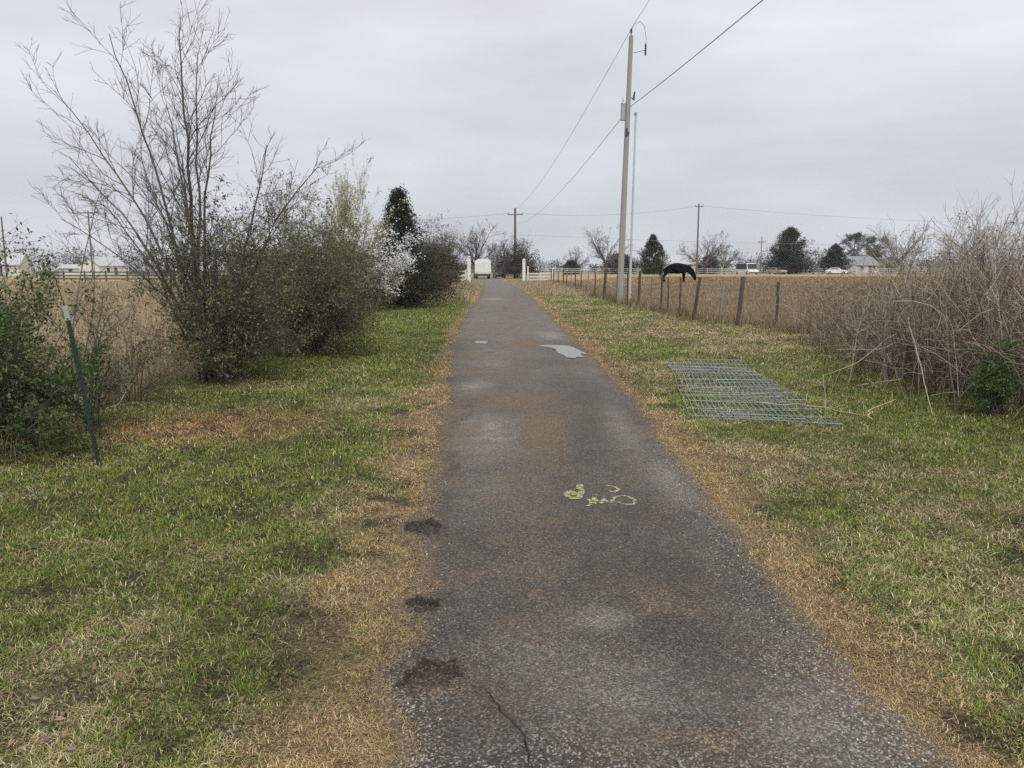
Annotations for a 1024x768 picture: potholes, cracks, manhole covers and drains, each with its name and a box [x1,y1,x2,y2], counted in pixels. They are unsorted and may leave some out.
pothole [401,594,445,615]
crack [448,677,547,768]
pothole [387,654,471,702]
pothole [400,516,447,537]
